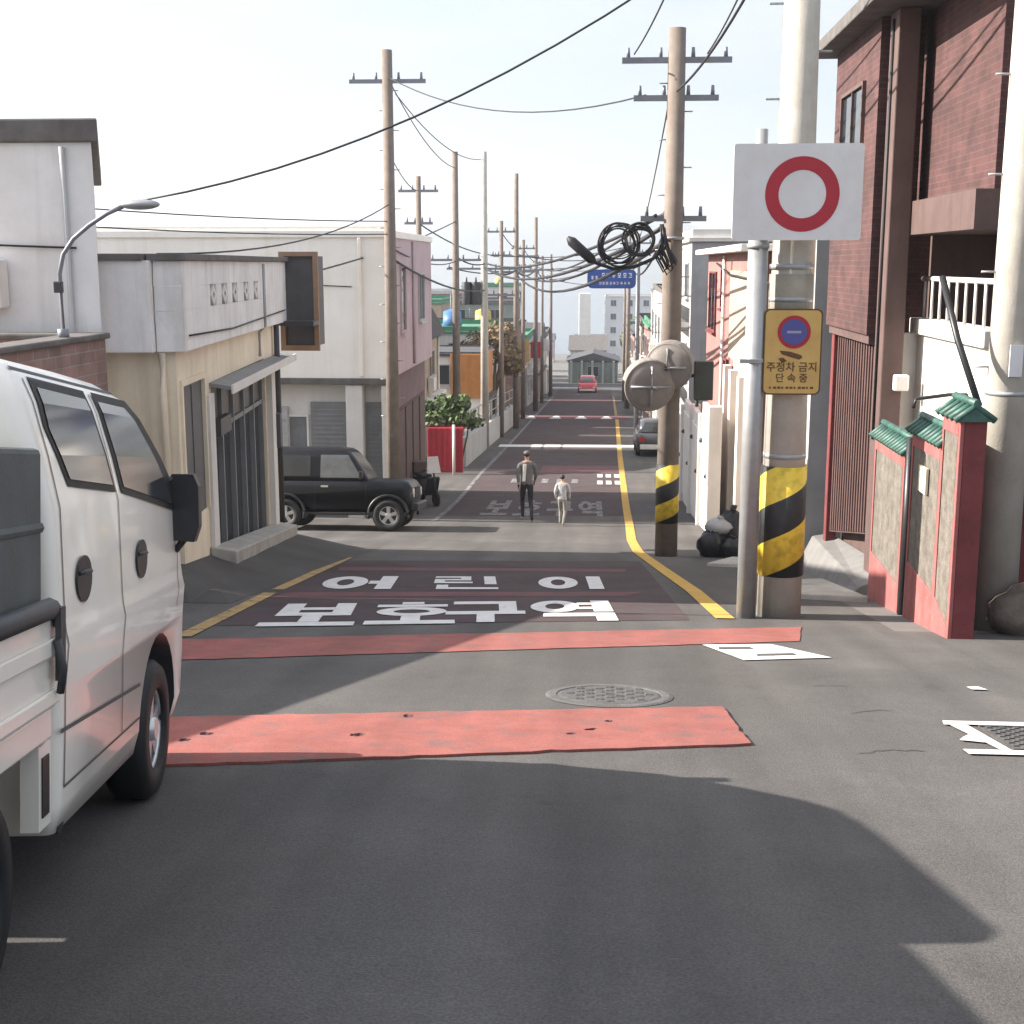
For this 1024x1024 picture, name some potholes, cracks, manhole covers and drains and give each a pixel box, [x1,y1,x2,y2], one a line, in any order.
manhole cover [545,684,673,707]
